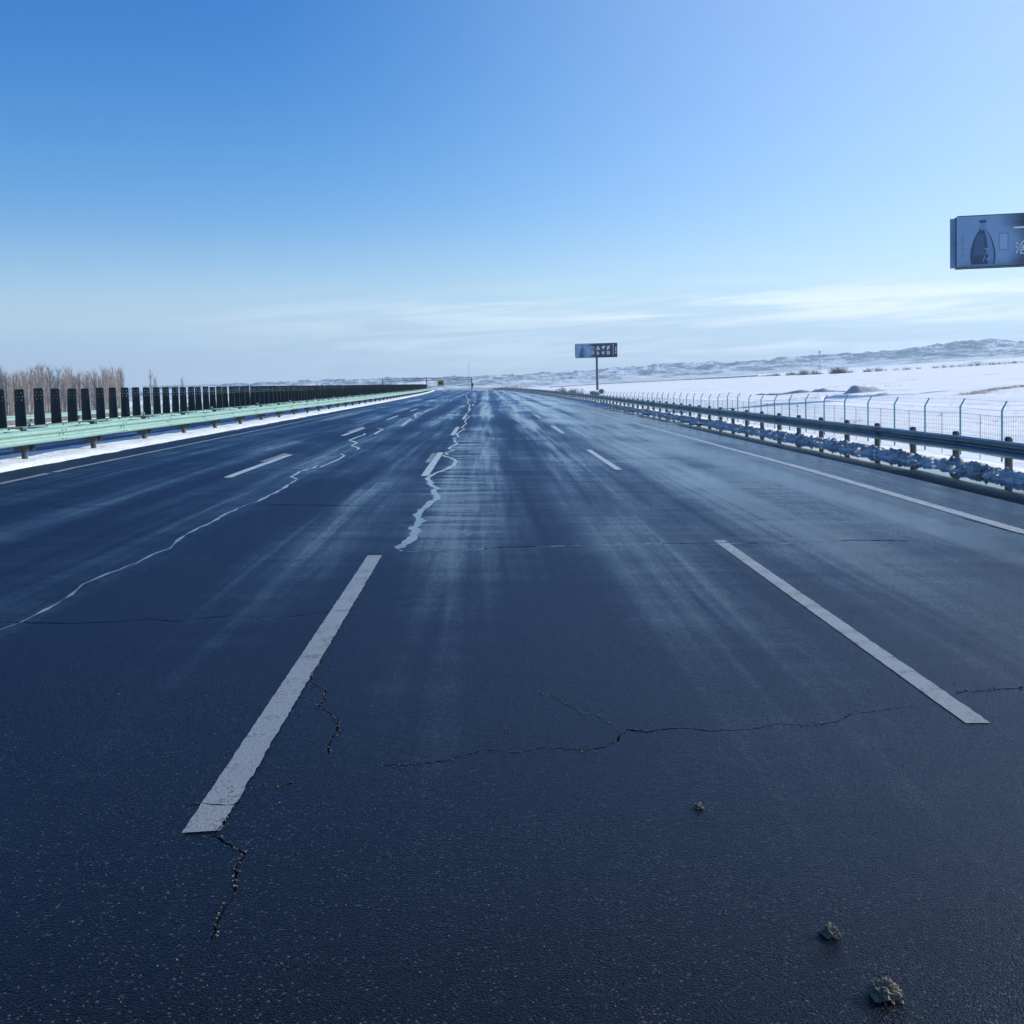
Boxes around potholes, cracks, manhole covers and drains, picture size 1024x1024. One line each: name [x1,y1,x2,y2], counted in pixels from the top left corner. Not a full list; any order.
crack [0,395,905,630]
crack [182,803,247,940]
crack [310,654,340,757]
crack [953,685,1024,695]
crack [380,692,912,767]
